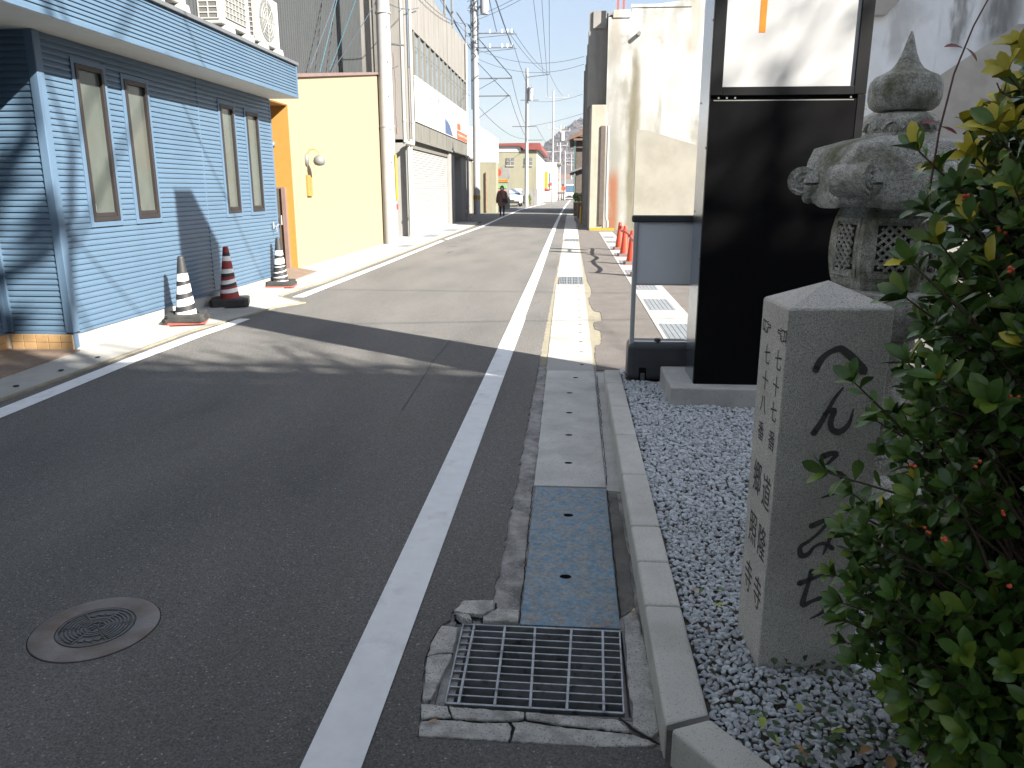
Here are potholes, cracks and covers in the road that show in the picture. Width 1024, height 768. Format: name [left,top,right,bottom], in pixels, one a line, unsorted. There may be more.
manhole cover [26,597,161,664]
crack [423,706,660,745]
drain grate [430,622,633,721]
